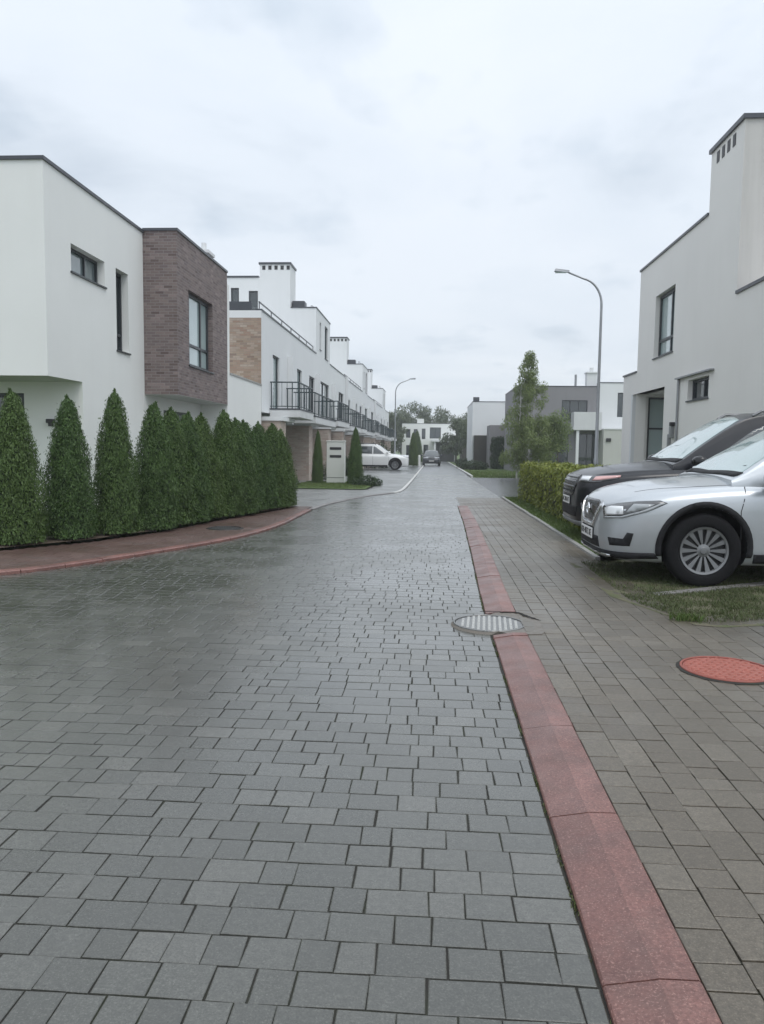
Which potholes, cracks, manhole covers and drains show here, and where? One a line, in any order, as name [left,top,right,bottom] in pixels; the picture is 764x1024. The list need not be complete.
manhole cover [676,656,764,685]
manhole cover [451,612,545,635]
